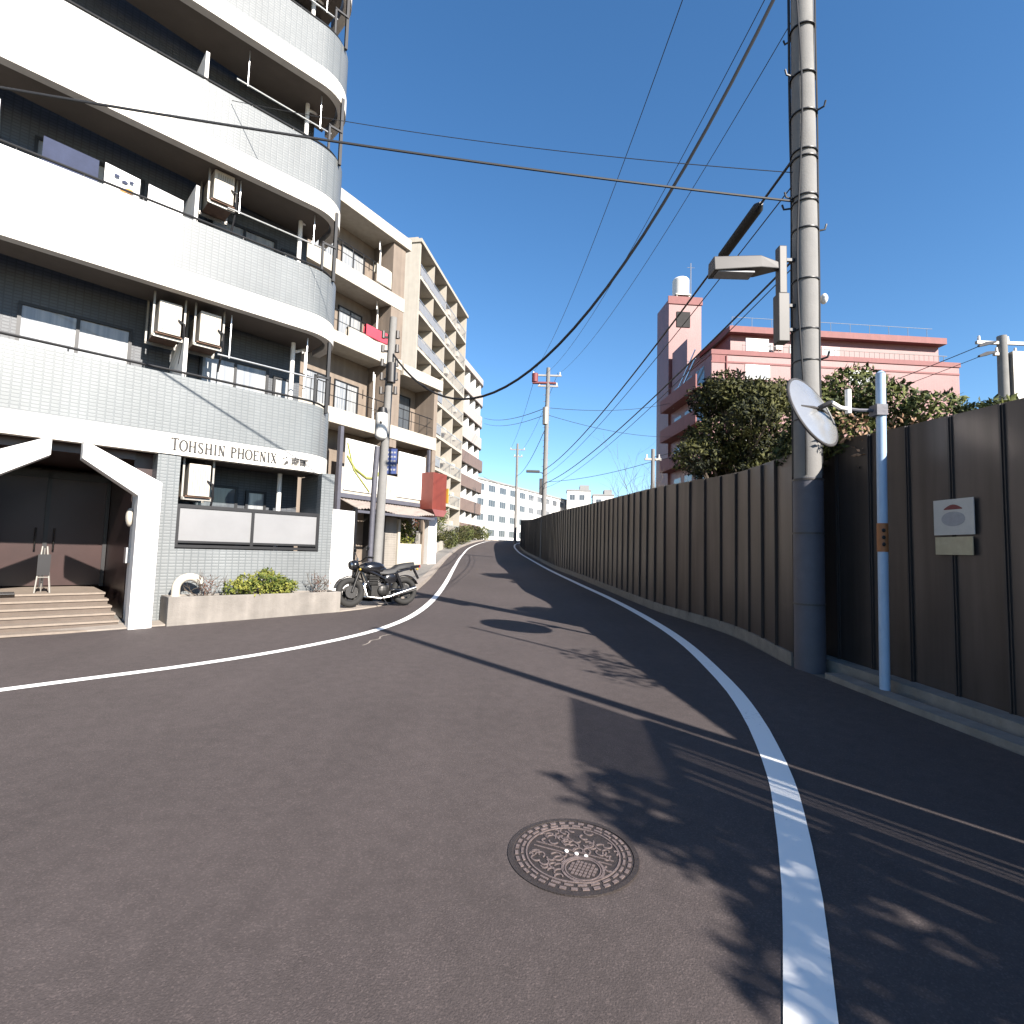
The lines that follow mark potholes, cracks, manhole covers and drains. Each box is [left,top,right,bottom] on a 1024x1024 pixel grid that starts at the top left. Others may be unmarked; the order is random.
manhole cover [508,818,640,898]
